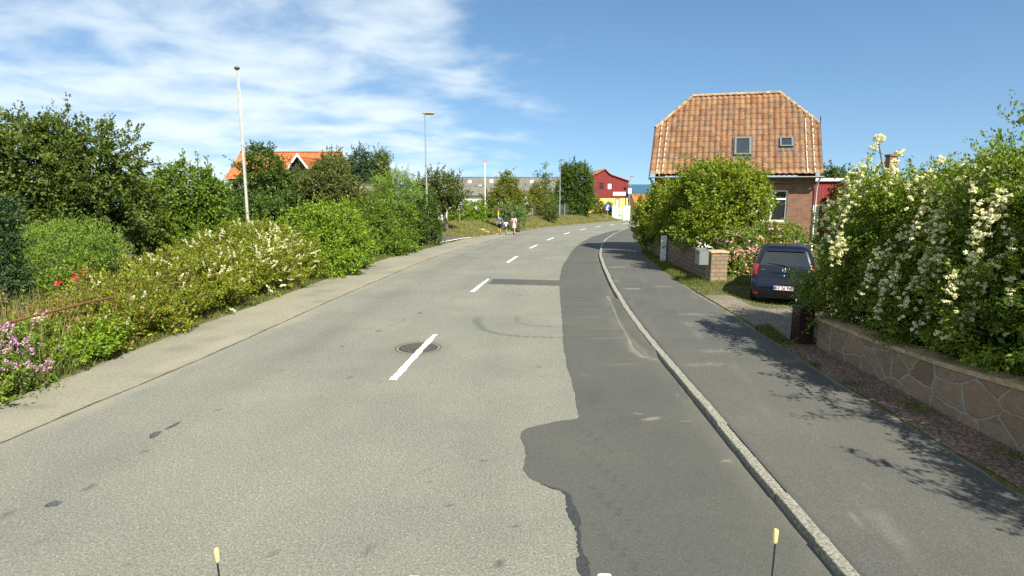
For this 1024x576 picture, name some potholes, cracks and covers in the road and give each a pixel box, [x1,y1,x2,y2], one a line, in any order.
manhole cover [393,342,443,355]
